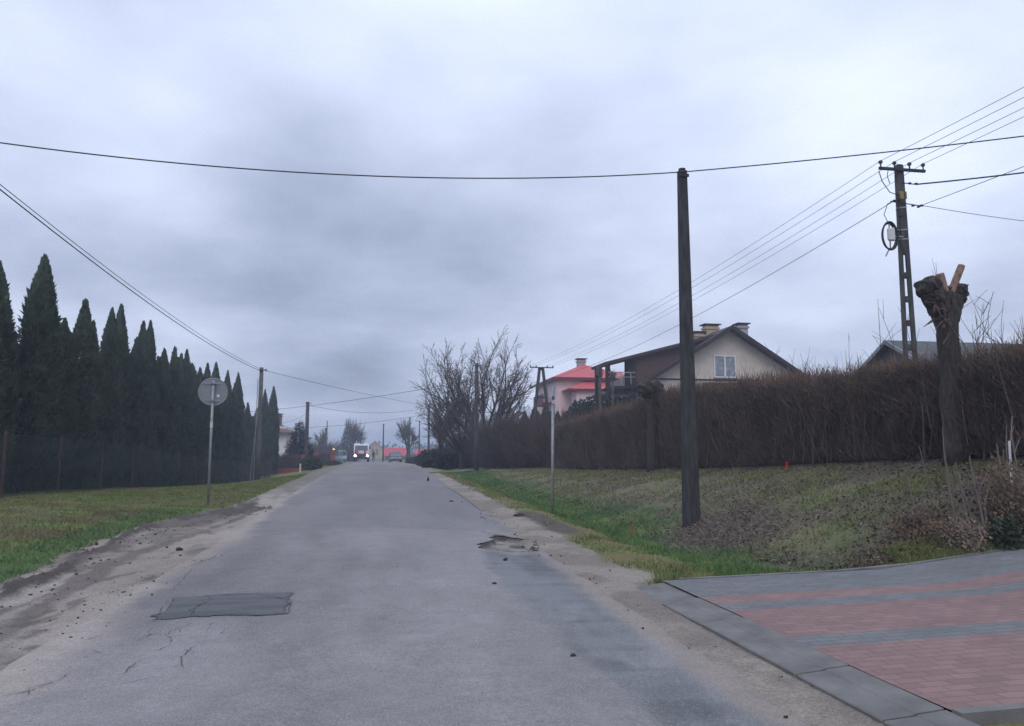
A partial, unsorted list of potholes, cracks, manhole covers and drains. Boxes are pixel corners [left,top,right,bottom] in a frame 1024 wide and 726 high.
crack [140,555,292,666]
pothole [477,536,538,552]
